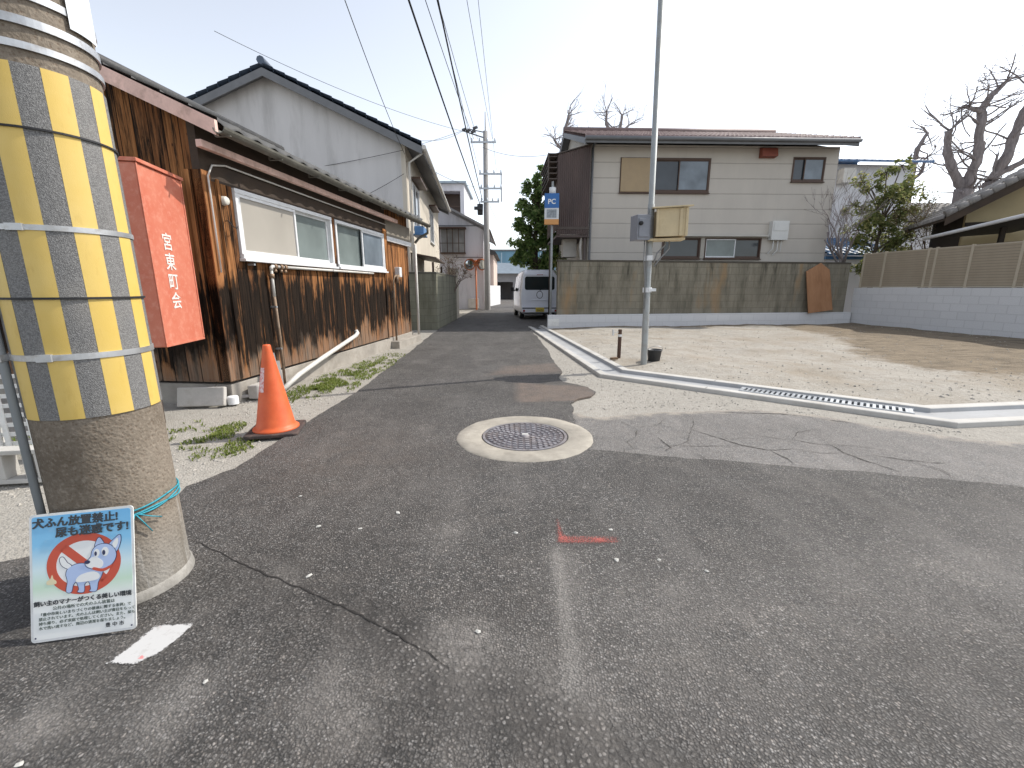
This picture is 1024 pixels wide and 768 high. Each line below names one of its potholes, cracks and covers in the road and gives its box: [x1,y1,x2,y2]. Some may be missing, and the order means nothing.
crack [190,539,449,668]
manhole cover [456,416,593,462]
crack [621,420,955,478]
